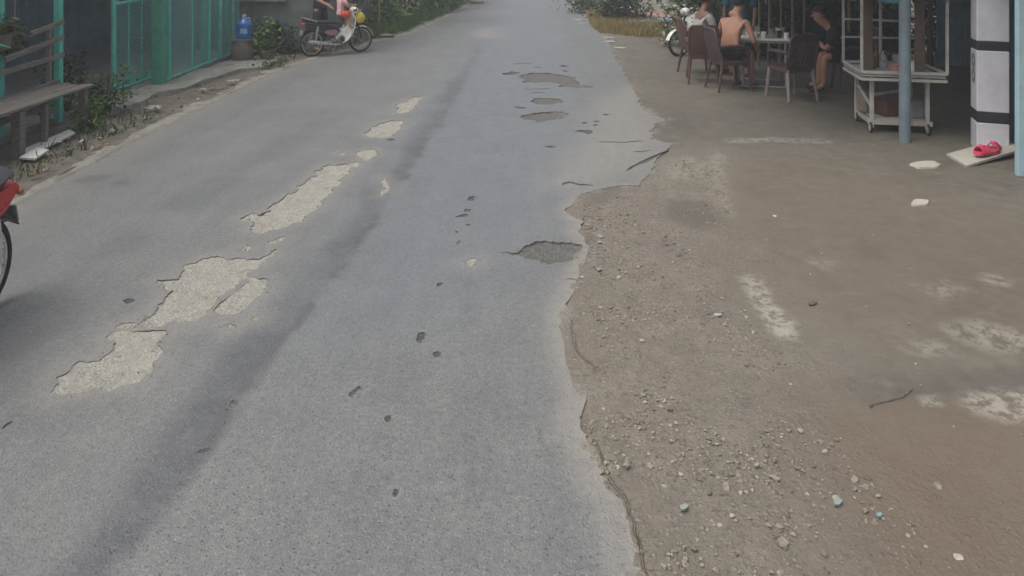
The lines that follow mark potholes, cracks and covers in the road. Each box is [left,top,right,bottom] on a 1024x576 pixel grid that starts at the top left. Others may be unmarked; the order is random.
pothole [501,241,583,264]
pothole [49,330,167,395]
pothole [364,120,404,138]
pothole [519,111,568,122]
crack [570,320,595,369]
crack [592,439,647,574]
pothole [241,162,362,234]
pothole [519,73,591,88]
pothole [396,96,422,113]
crack [614,141,669,171]
pothole [138,249,277,329]
